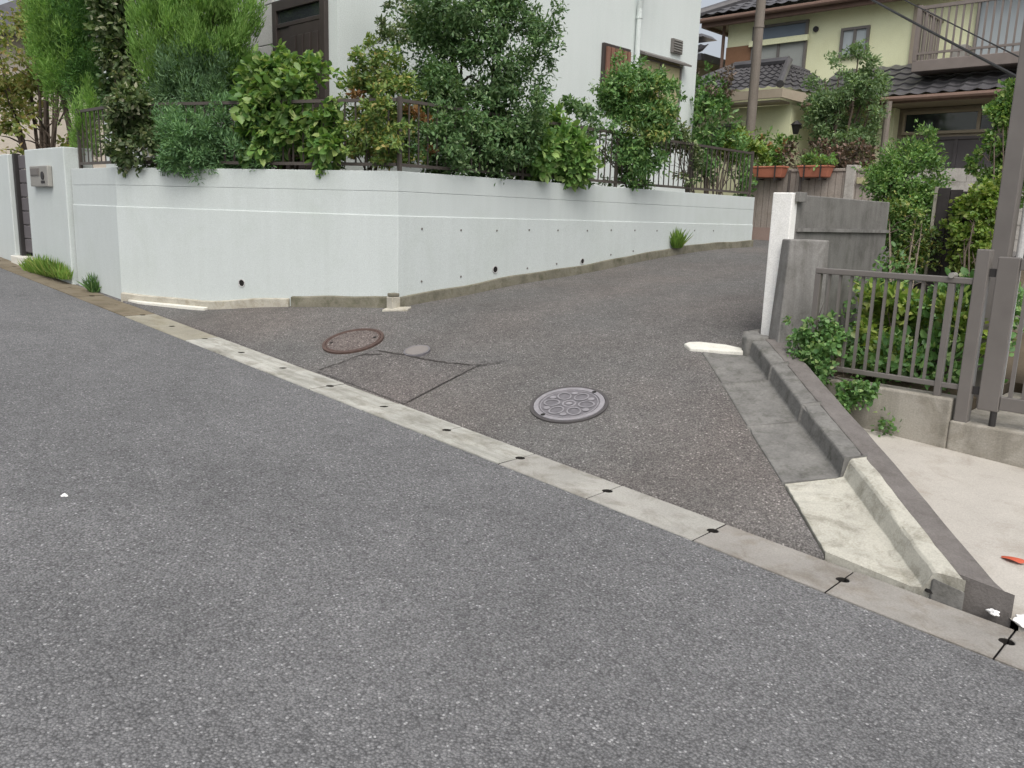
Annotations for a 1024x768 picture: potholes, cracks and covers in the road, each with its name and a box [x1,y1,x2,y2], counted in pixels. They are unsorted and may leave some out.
manhole cover [322,328,384,354]
utility cover [403,345,431,357]
manhole cover [530,386,609,424]
